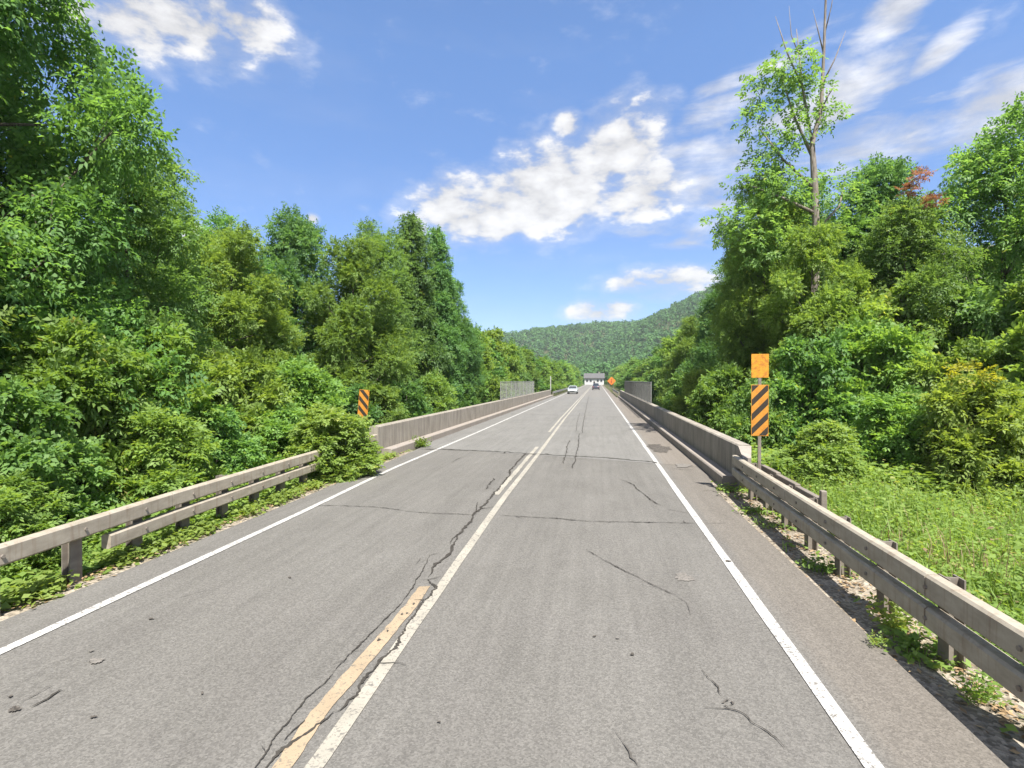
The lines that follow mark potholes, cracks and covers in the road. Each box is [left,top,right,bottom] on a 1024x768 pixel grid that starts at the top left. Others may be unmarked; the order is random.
crack [563,401,588,466]
crack [255,452,704,768]
crack [703,671,785,748]
